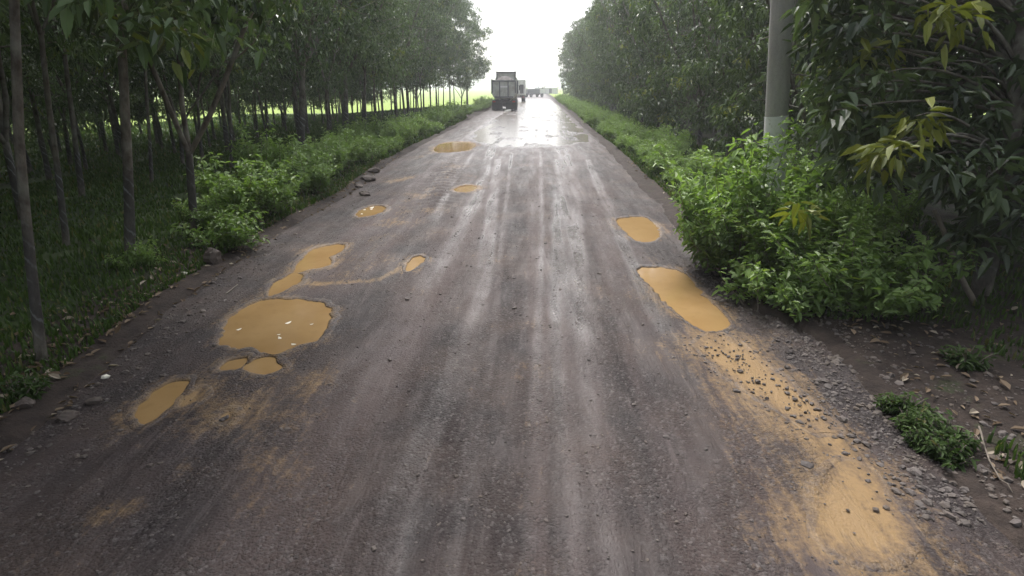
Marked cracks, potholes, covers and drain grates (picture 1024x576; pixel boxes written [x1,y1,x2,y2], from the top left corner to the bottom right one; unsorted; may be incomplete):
pothole [447,184,483,193]
pothole [633,264,736,333]
pothole [400,254,430,273]
pothole [612,215,667,244]
pothole [207,352,255,375]
pothole [428,141,481,153]
pothole [290,242,349,273]
pothole [235,354,293,379]
pothole [350,204,391,218]
pothole [263,272,309,297]
pothole [122,374,197,431]
pothole [208,295,342,355]
